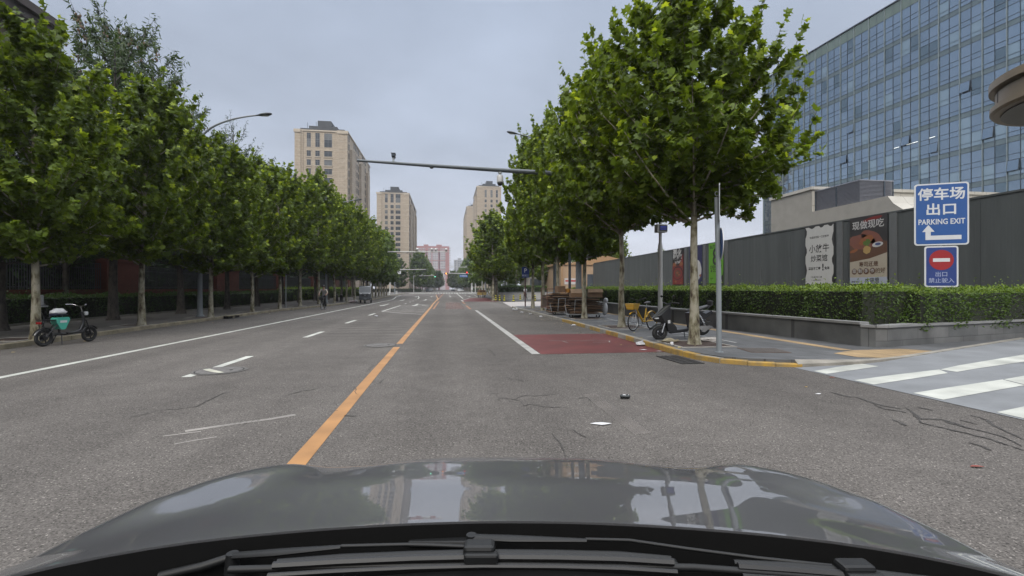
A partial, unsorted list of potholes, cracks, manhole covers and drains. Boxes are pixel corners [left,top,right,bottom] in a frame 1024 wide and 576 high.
drain grate [657,355,705,364]
manhole cover [190,366,248,375]
crack [829,391,1023,450]
